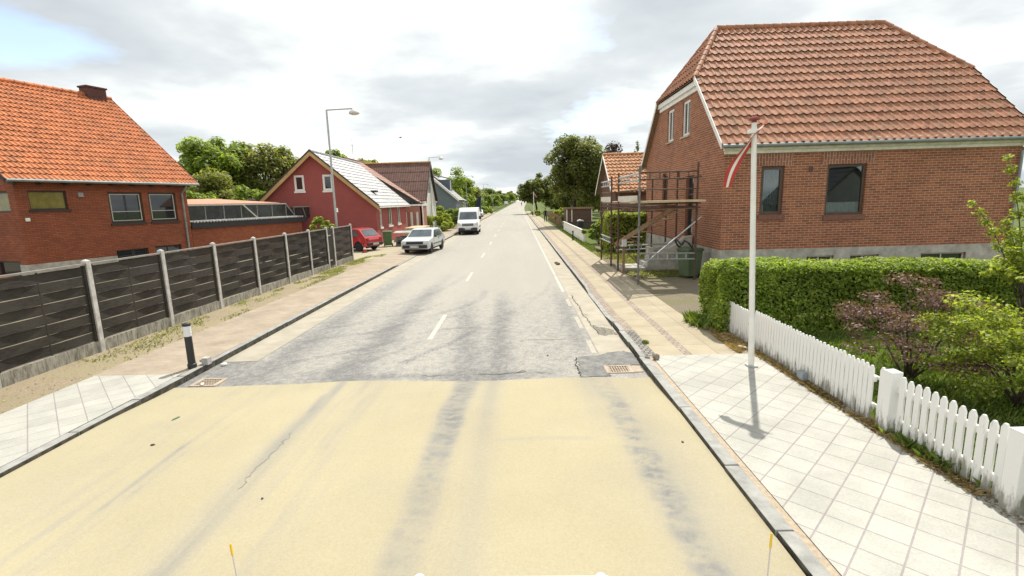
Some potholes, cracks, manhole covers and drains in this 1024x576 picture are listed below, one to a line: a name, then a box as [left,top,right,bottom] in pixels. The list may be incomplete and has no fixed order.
drain grate [604,365,643,374]
crack [571,295,617,335]
drain grate [188,378,229,387]
